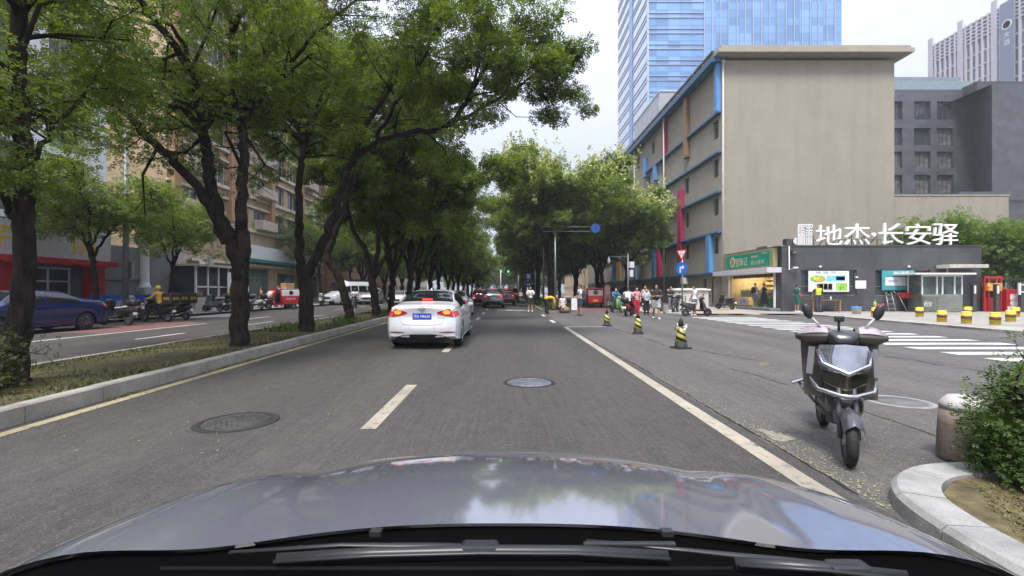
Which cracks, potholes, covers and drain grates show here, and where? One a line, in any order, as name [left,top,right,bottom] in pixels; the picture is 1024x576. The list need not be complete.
manhole cover [866,395,938,409]
manhole cover [503,377,555,388]
manhole cover [191,412,280,433]
